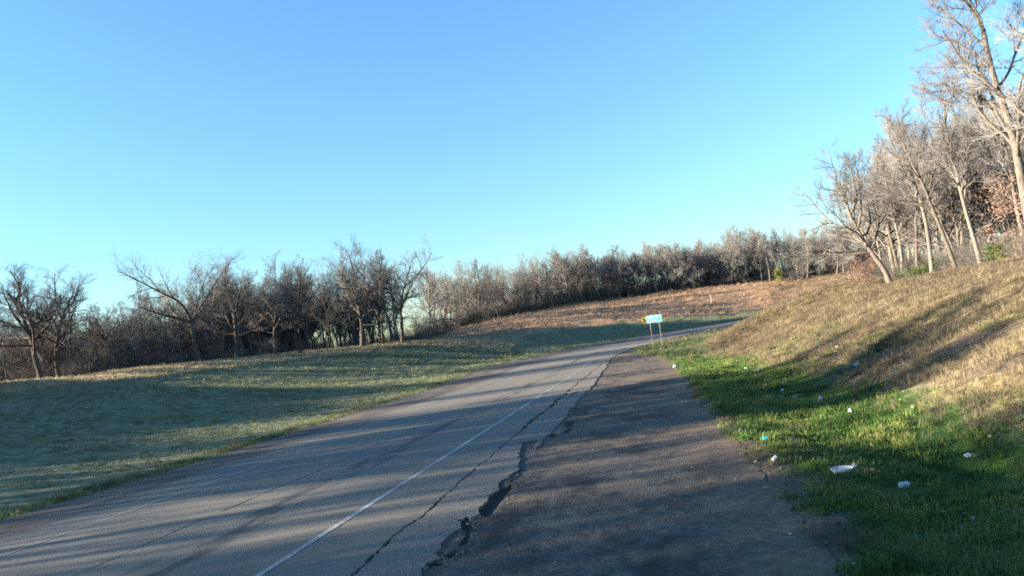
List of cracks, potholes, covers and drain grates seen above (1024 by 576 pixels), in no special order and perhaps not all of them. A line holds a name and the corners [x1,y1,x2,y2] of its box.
crack [357,369,596,573]
